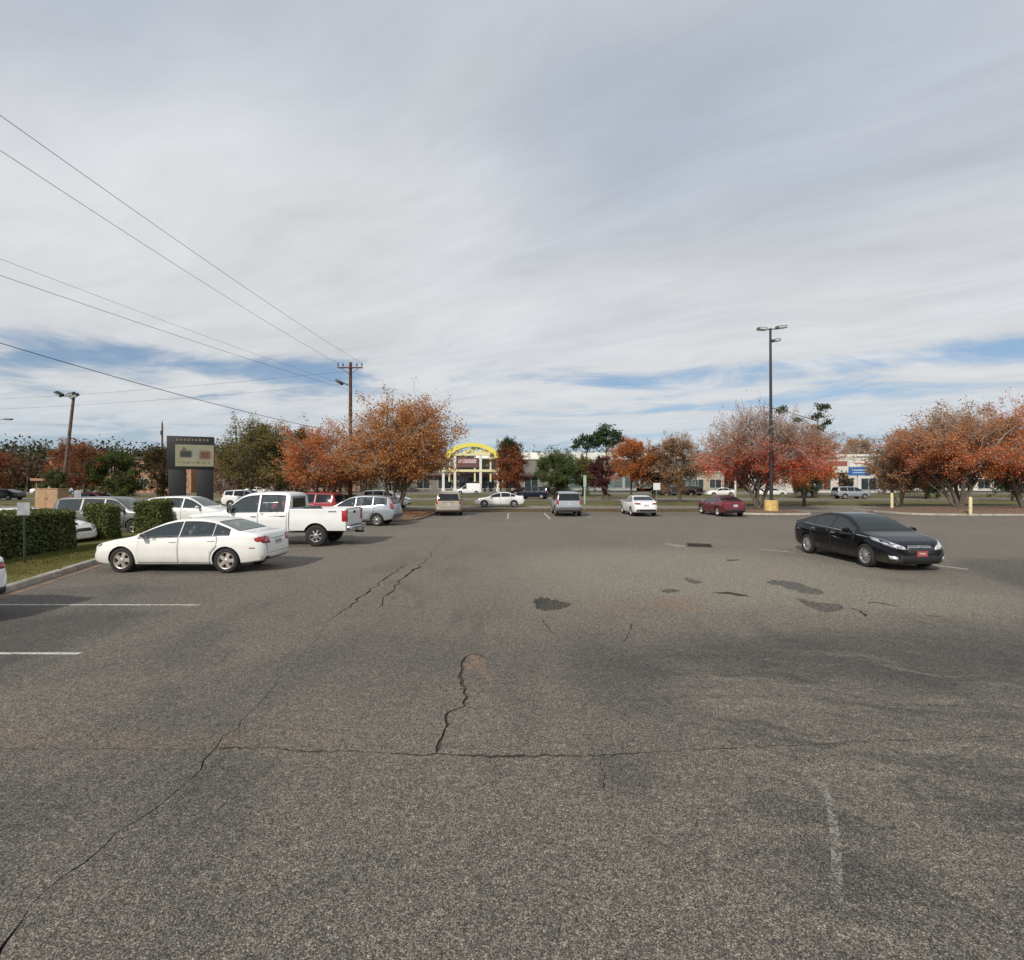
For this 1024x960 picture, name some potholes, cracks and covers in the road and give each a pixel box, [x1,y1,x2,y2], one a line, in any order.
pothole [796,598,845,613]
crack [0,532,1024,954]
pothole [766,580,824,595]
pothole [533,595,572,611]
